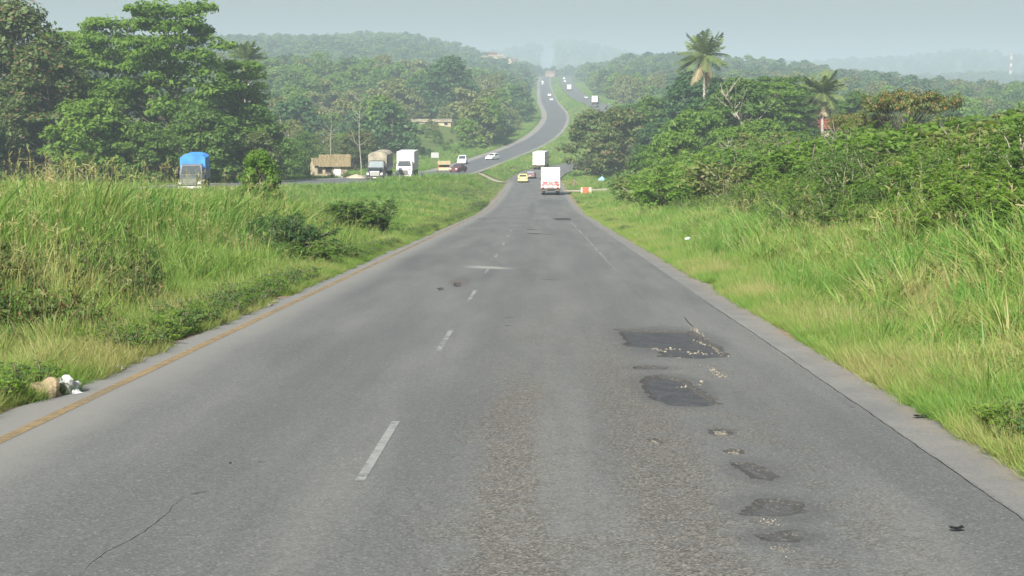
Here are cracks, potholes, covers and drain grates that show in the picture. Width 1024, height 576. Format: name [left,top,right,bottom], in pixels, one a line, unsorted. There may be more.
crack [87,503,177,567]
pothole [708,428,738,436]
pothole [729,462,780,481]
pothole [613,328,730,378]
pothole [737,498,805,526]
pothole [753,530,804,557]
